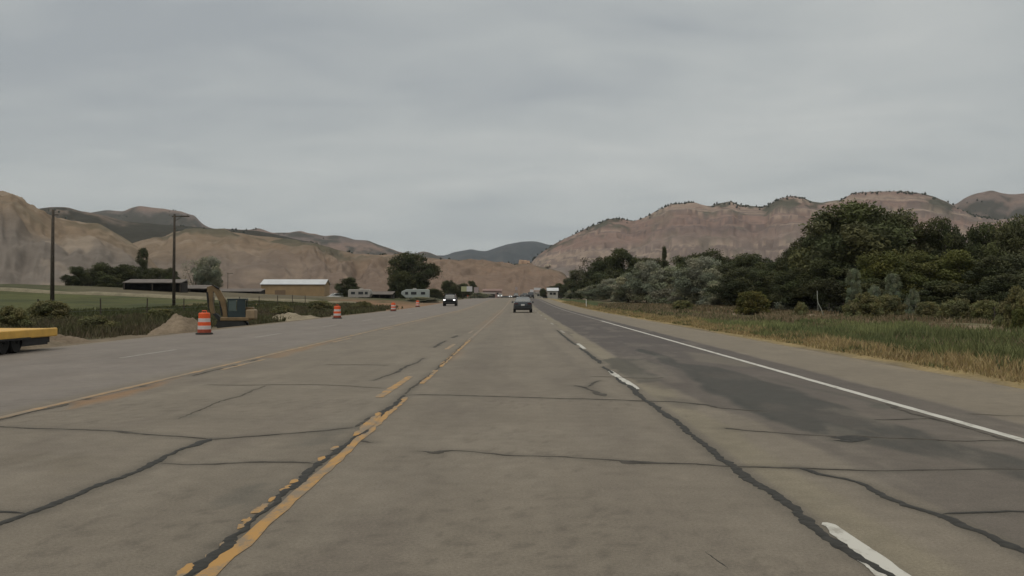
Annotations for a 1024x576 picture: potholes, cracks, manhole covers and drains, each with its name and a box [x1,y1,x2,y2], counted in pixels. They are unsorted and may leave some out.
crack [0,330,1024,576]
